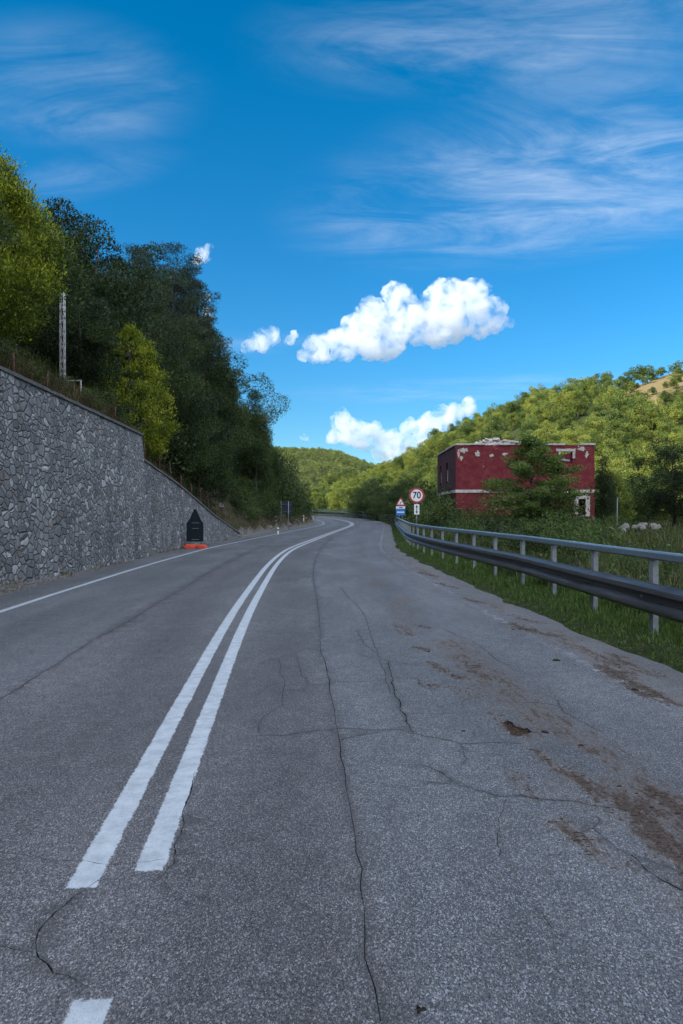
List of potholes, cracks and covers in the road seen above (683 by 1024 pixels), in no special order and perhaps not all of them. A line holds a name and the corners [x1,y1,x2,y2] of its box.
pothole [503,720,532,736]
crack [423,765,683,891]
